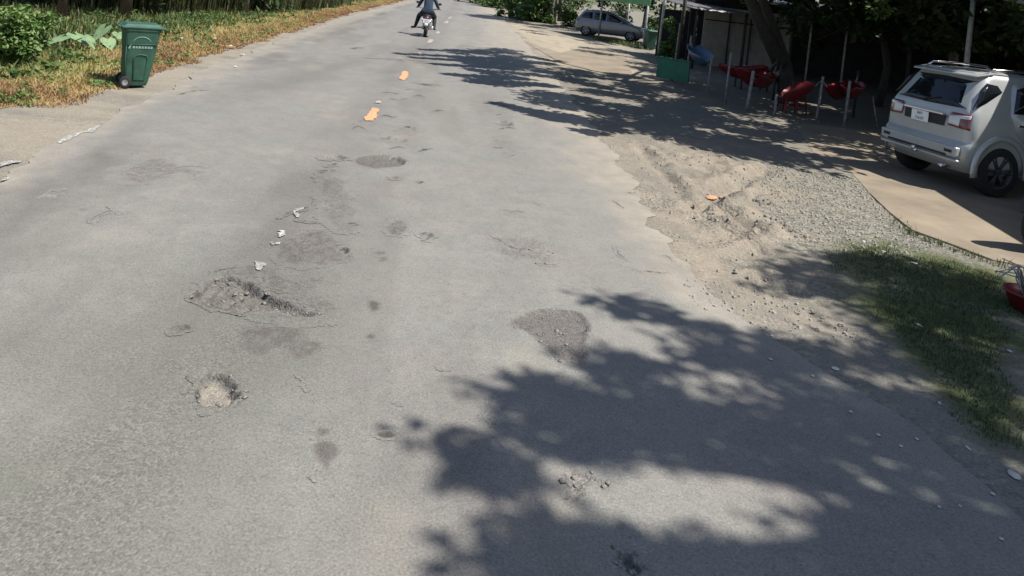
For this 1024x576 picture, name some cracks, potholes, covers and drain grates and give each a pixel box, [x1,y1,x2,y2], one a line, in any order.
crack [485,233,559,267]
pothole [609,544,650,576]
pothole [184,275,325,318]
crack [35,188,124,225]
pothole [188,370,249,412]
pothole [556,465,614,507]
crack [276,200,359,226]
